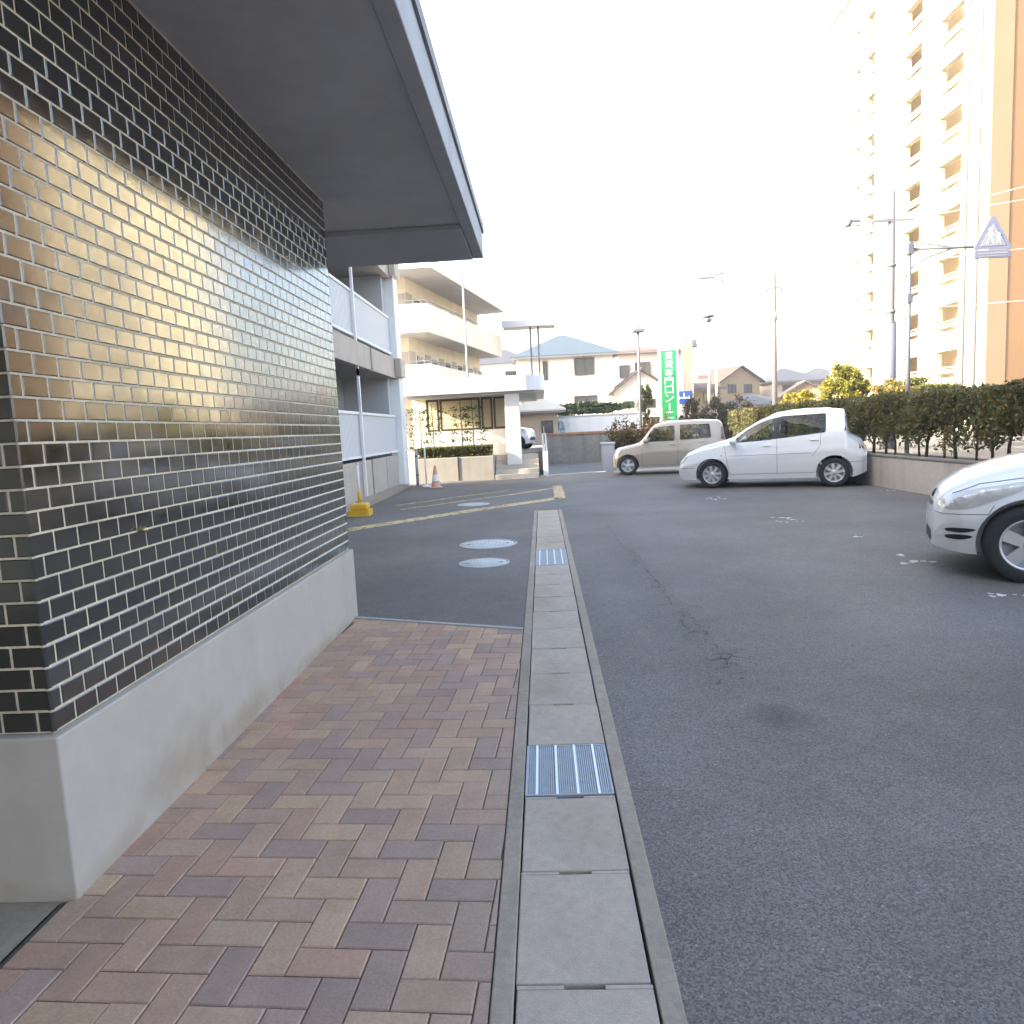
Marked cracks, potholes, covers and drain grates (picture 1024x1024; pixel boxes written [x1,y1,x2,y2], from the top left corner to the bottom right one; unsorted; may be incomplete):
drain grate [535,549,569,567]
manhole cover [459,558,510,568]
manhole cover [459,539,517,549]
drain grate [525,744,615,799]
crack [594,508,756,685]
